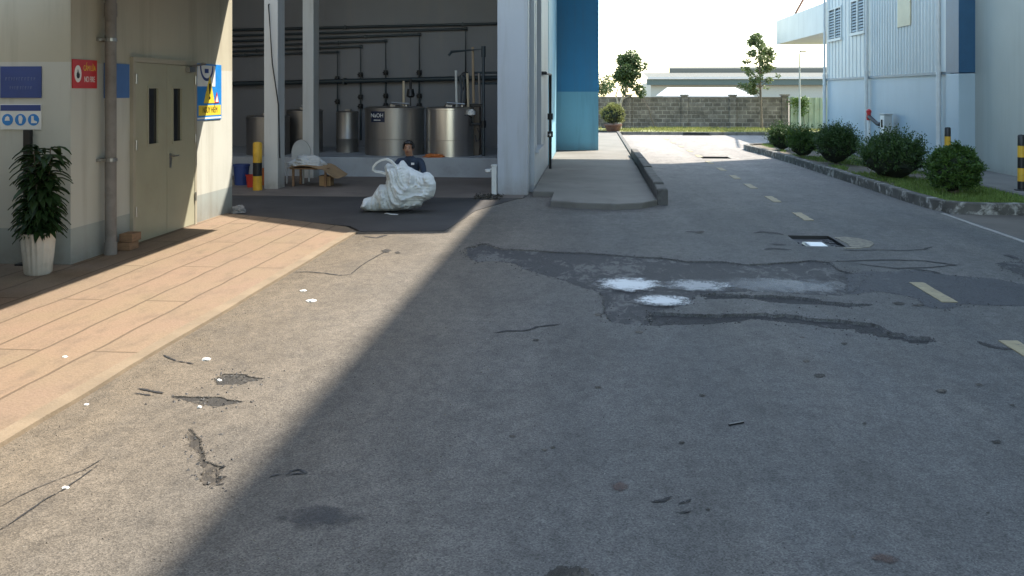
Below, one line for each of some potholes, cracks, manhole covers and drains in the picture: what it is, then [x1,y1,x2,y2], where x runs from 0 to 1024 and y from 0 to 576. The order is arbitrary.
manhole cover [787,235,846,247]
crack [270,469,307,477]
pothole [212,373,260,385]
crack [494,324,558,333]
crack [832,247,956,274]
pothole [172,396,245,406]
crack [647,293,937,344]
